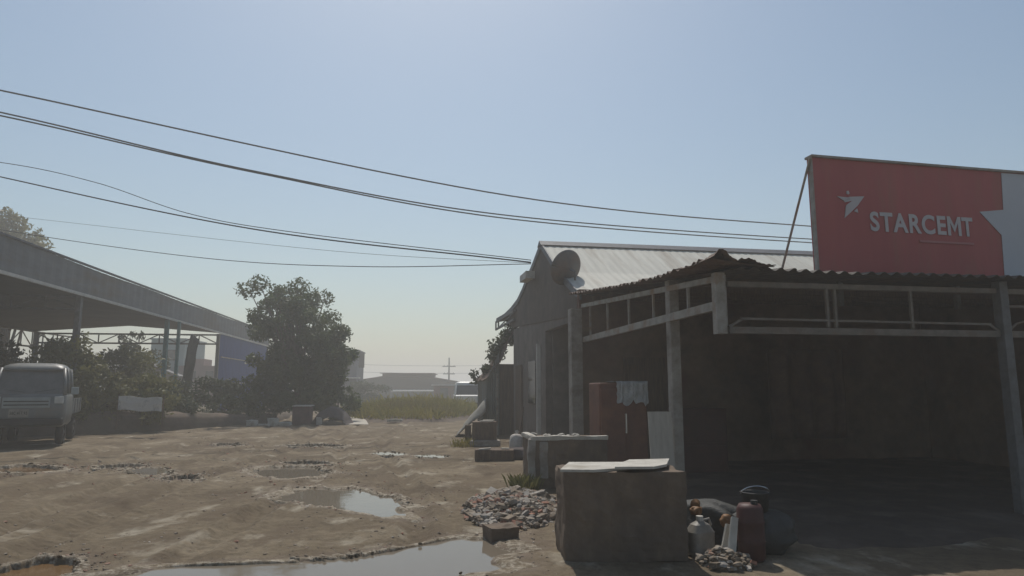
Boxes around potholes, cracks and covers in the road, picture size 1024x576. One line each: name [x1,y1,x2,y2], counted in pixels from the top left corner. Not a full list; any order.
pothole [90,463,151,471]
pothole [0,552,91,576]
pothole [256,484,427,523]
pothole [69,532,542,576]
pothole [0,462,74,476]
pothole [240,464,343,480]
